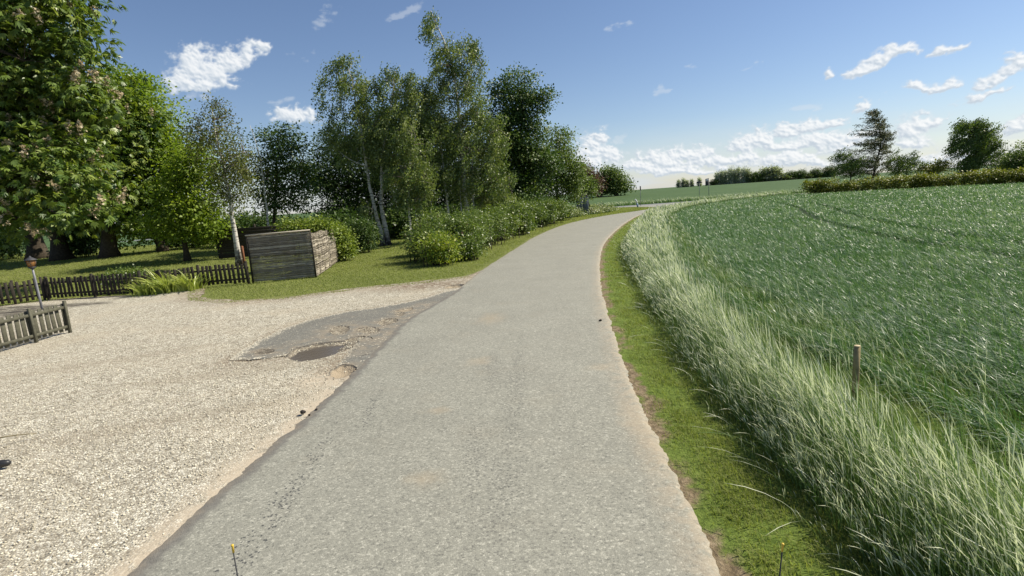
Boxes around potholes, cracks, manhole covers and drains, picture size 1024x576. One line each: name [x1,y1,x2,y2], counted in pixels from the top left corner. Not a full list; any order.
pothole [328,364,357,379]
pothole [285,336,366,362]
pothole [329,325,350,335]
pothole [377,318,399,326]
